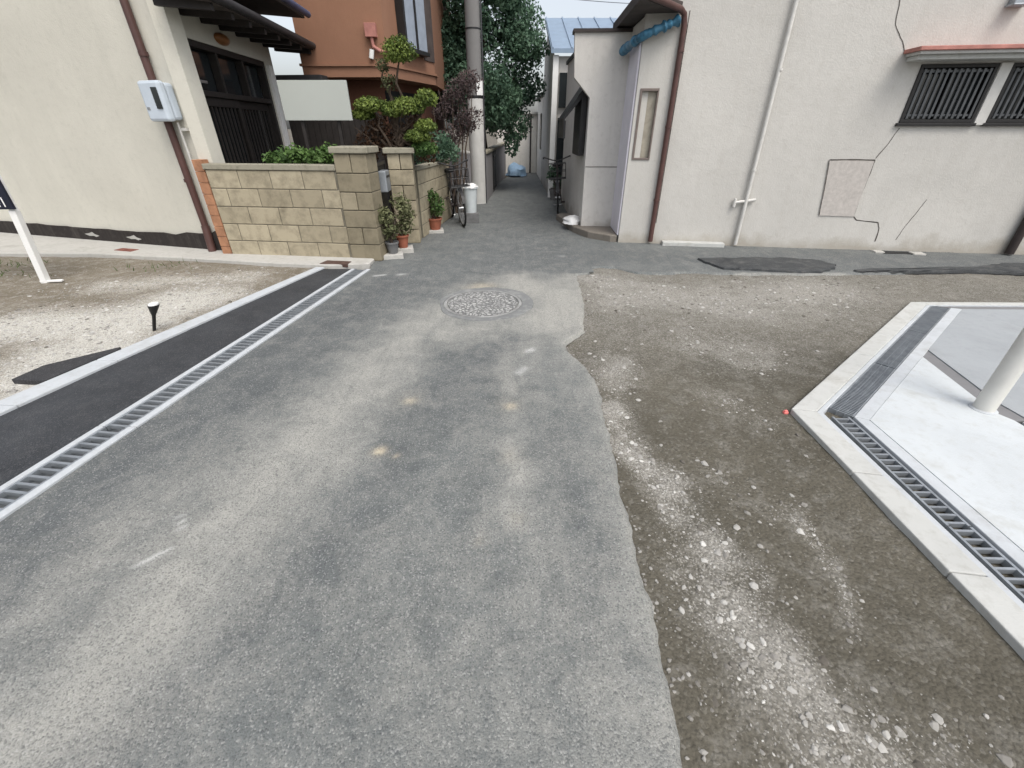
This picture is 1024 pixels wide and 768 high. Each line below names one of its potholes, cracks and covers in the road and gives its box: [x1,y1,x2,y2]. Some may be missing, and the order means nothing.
manhole cover [440,287,533,321]
